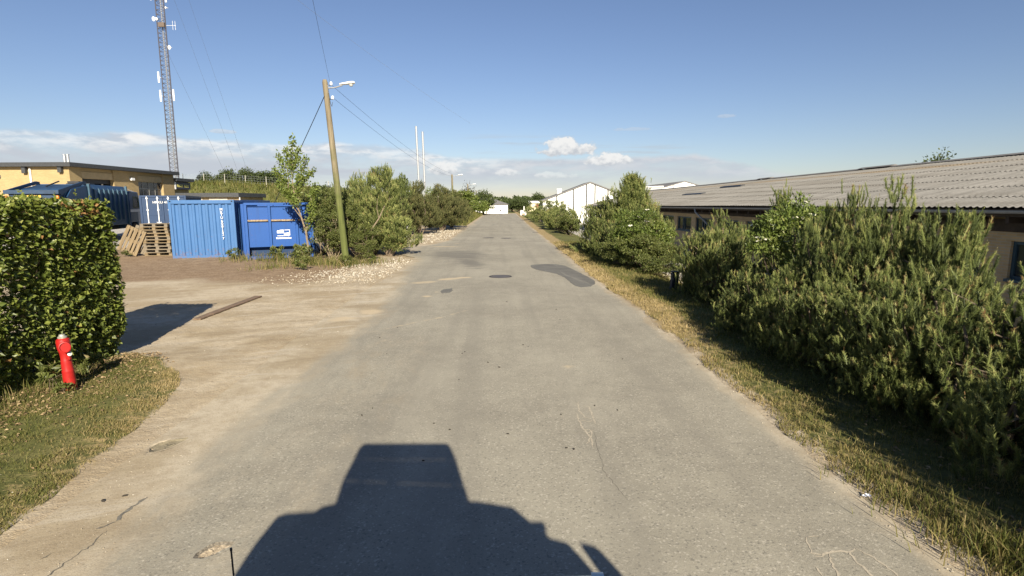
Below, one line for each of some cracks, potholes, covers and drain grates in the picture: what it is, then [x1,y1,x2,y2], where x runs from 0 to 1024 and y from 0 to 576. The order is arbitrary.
crack [44,497,148,576]
crack [577,402,623,494]
crack [806,536,898,576]
